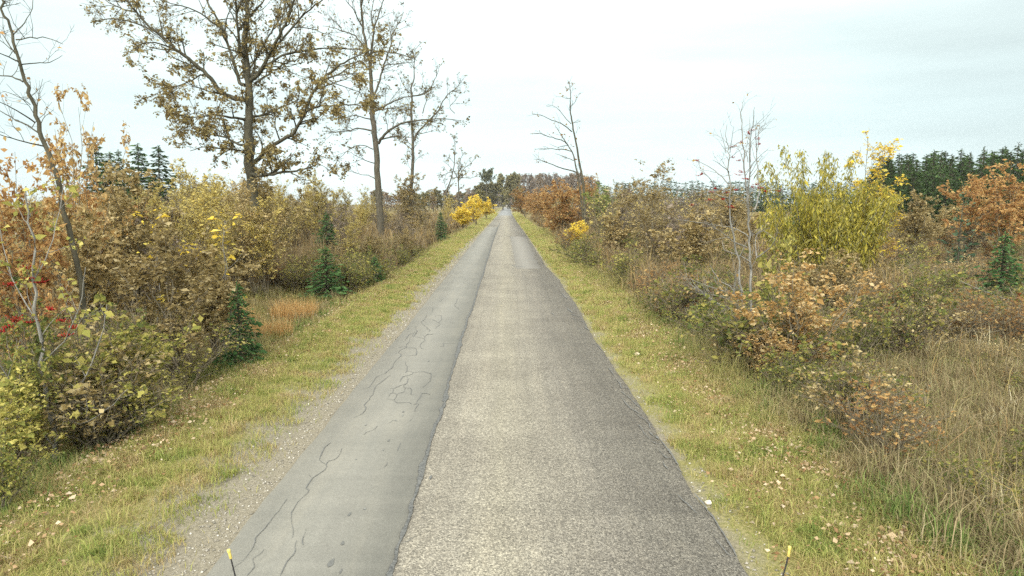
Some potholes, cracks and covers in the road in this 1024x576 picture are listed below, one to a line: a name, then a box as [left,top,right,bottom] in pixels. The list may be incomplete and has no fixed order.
crack [360,300,459,432]
crack [234,442,342,575]
